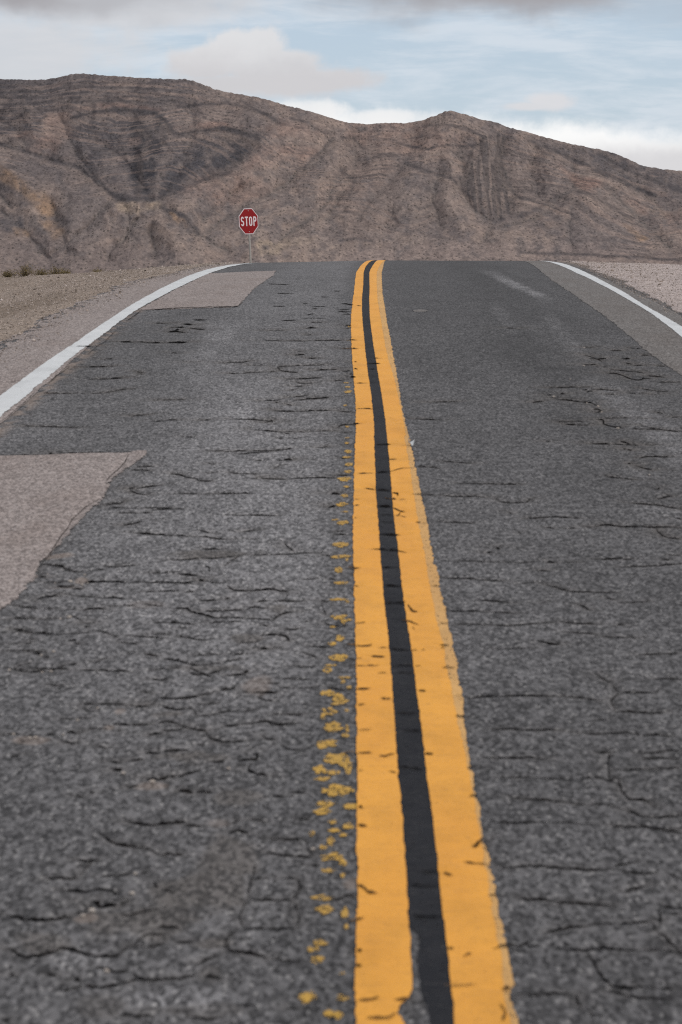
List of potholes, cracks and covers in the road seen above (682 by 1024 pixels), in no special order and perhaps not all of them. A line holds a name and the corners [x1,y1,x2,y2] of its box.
crack [1,283,682,991]
